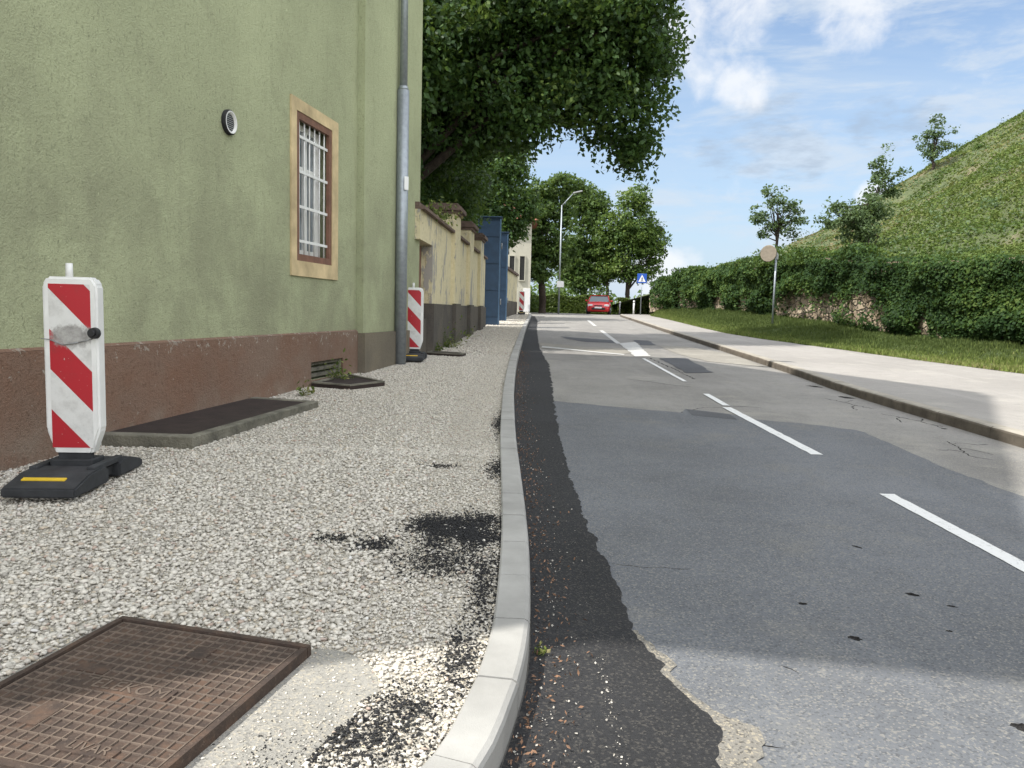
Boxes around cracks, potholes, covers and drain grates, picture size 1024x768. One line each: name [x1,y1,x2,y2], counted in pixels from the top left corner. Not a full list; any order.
manhole cover [0,616,311,768]
utility cover [100,397,318,449]
crack [825,398,991,460]
